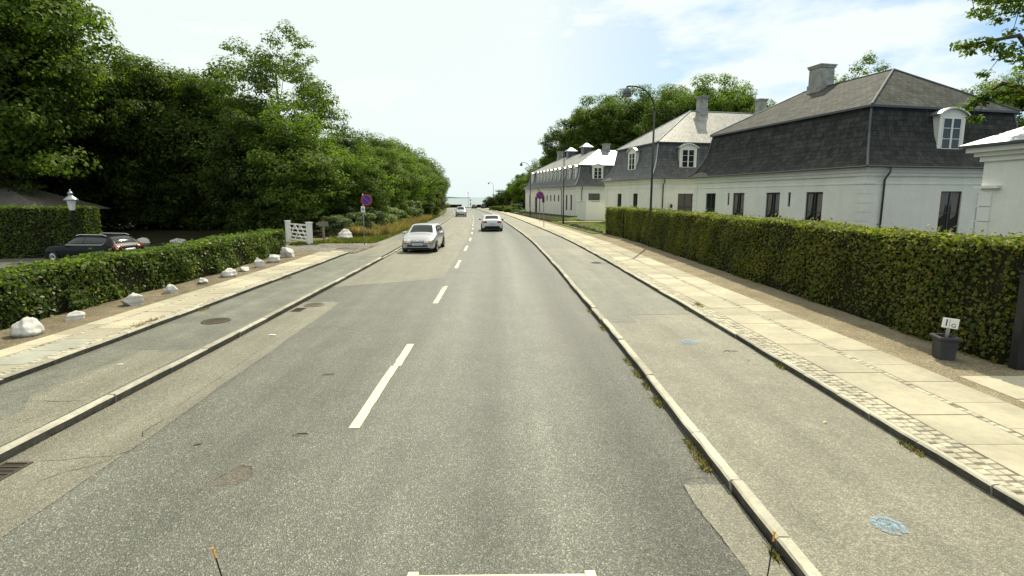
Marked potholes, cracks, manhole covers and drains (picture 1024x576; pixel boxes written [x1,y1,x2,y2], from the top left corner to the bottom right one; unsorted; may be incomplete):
drain grate [0,462,33,481]
